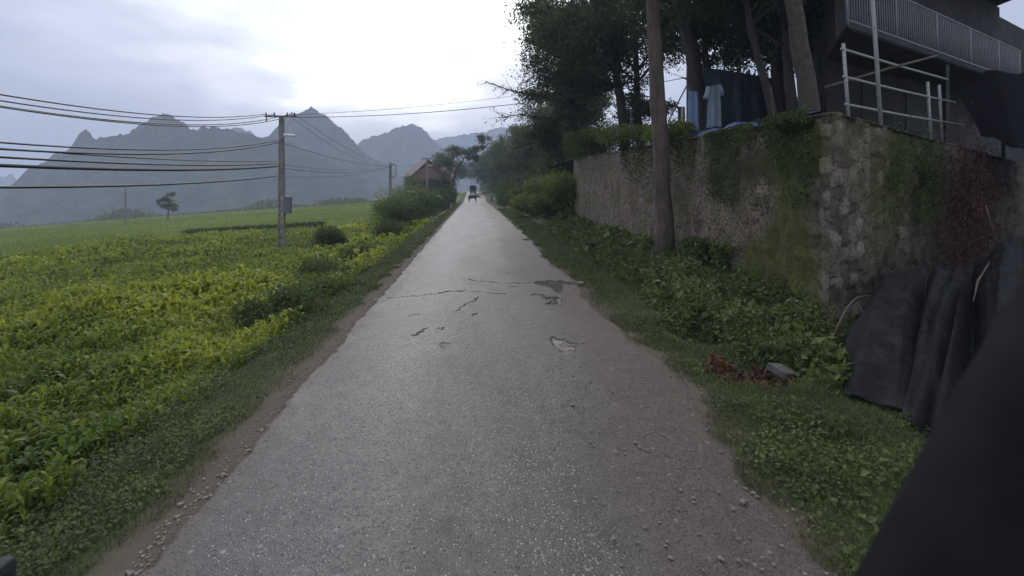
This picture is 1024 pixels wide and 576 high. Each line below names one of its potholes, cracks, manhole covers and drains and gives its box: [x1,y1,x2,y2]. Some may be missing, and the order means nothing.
crack [398,279,532,336]
pothole [543,296,563,306]
pothole [549,335,582,354]
pothole [534,280,577,293]
